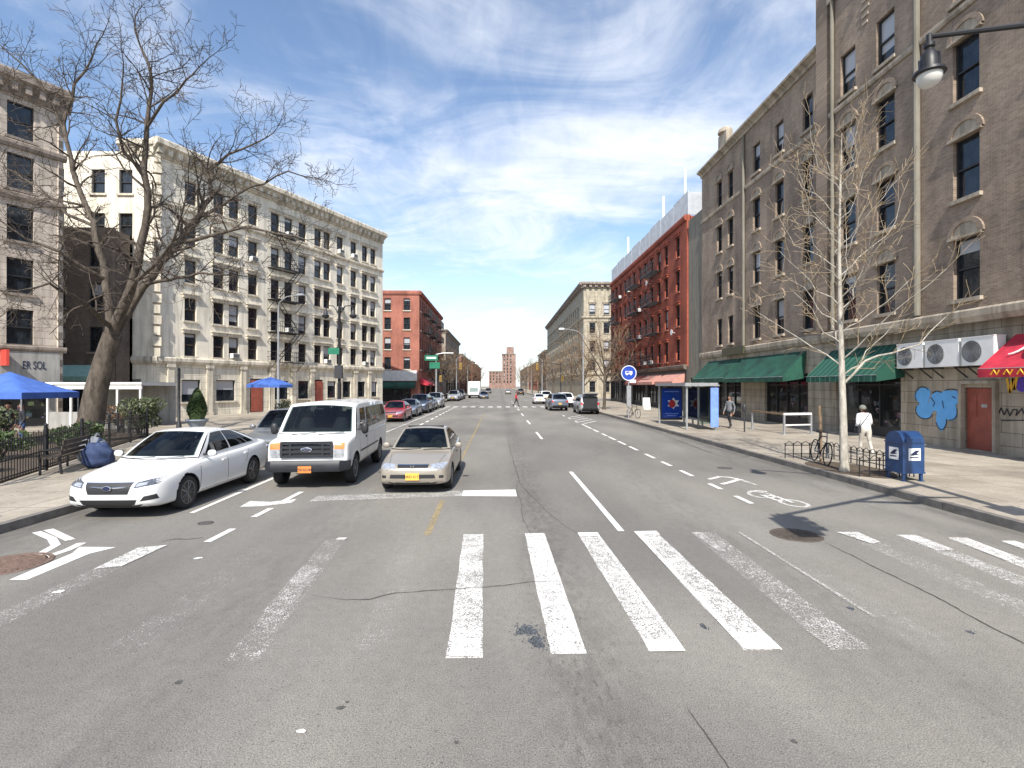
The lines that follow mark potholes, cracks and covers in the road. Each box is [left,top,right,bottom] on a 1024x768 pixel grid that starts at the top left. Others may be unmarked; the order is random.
manhole cover [0,552,56,575]
manhole cover [770,528,824,542]
crack [316,580,557,600]
crack [507,437,574,538]
crack [688,710,729,768]
crack [827,543,1023,643]
